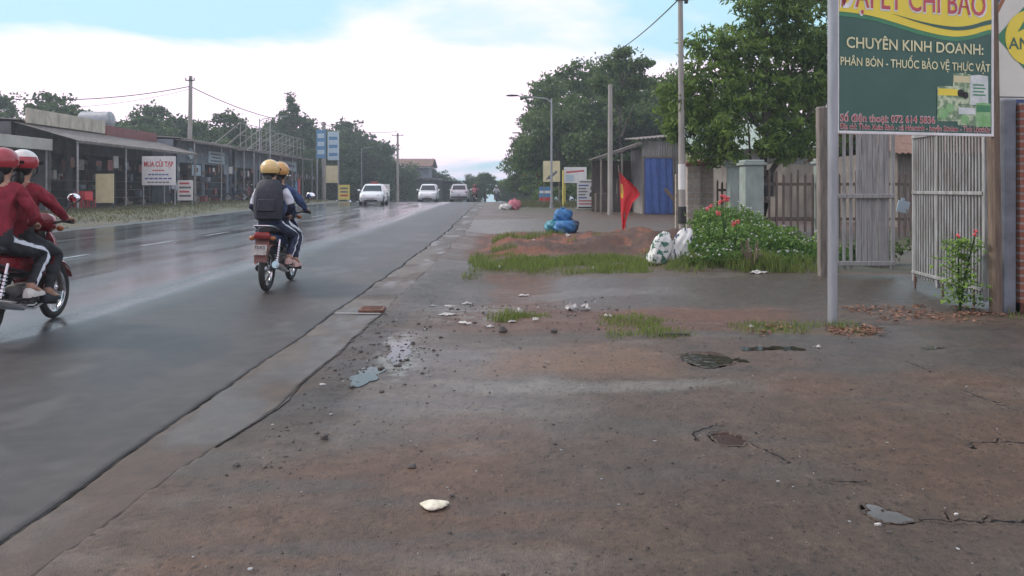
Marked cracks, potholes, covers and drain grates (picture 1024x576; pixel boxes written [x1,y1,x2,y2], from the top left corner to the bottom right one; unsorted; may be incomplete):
crack [964,438,1024,449]
crack [957,389,1024,414]
crack [747,442,790,463]
crack [901,360,932,372]
pothole [706,430,752,447]
crack [919,511,1024,525]
pothole [673,352,739,369]
crack [688,423,727,441]
